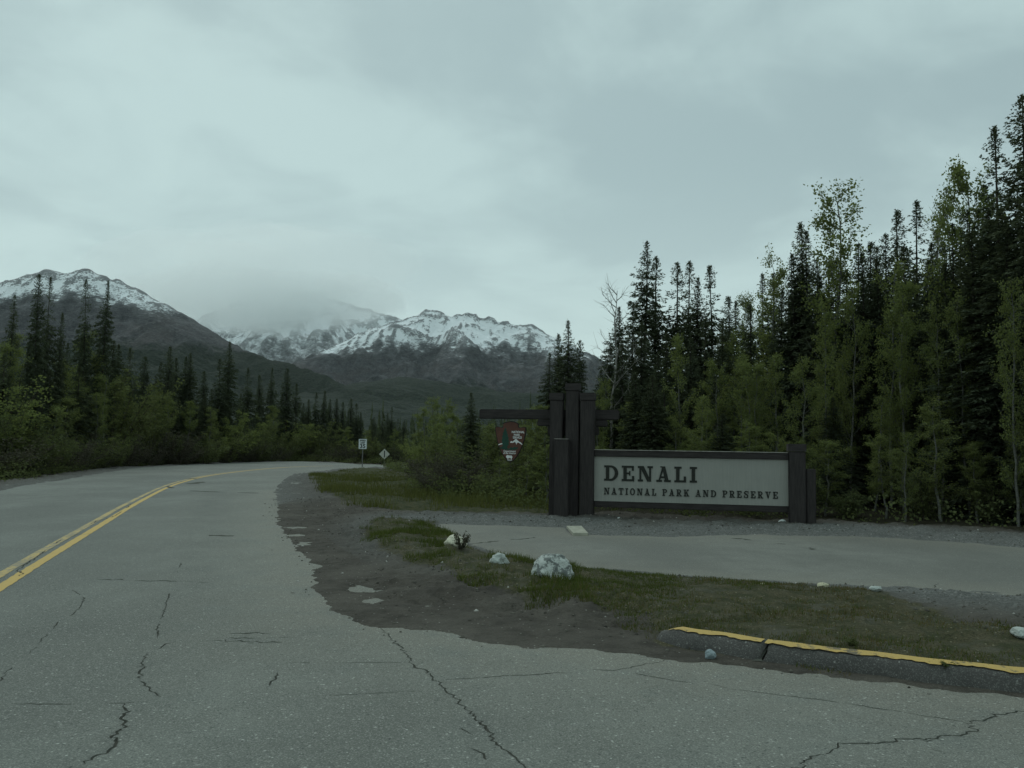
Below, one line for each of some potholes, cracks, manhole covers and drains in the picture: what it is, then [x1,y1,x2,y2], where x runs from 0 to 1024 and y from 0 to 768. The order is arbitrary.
crack [791,711,1024,768]
crack [28,563,204,764]
crack [217,632,289,643]
crack [0,590,85,681]
crack [288,629,664,768]
